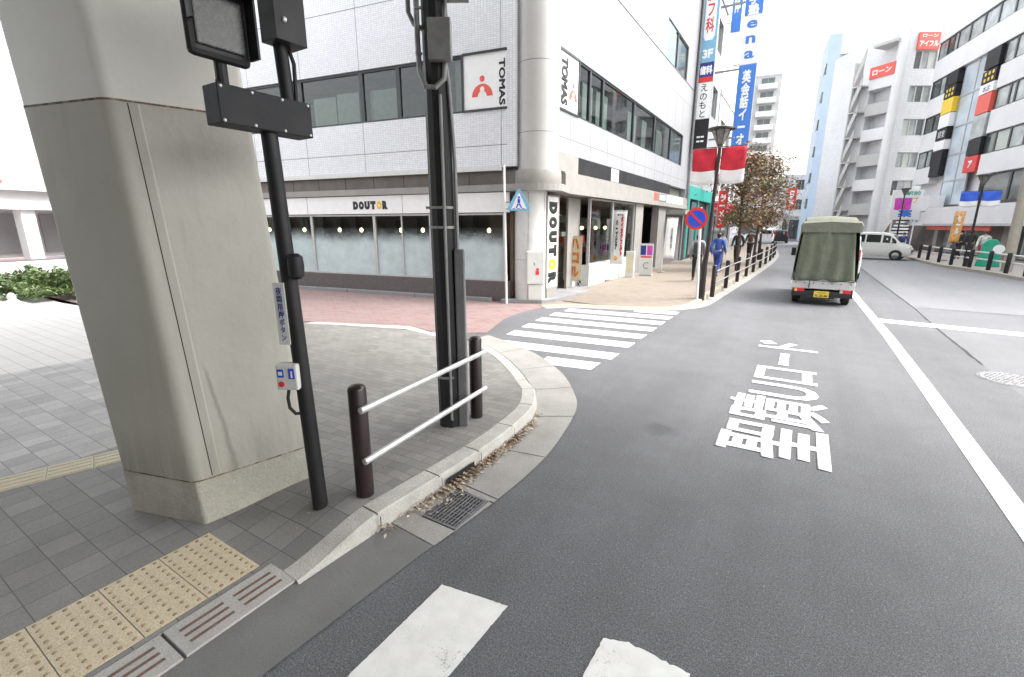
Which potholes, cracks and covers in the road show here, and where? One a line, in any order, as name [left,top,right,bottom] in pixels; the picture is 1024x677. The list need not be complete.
drain grate [423,489,489,531]
manhole cover [976,371,1024,387]
